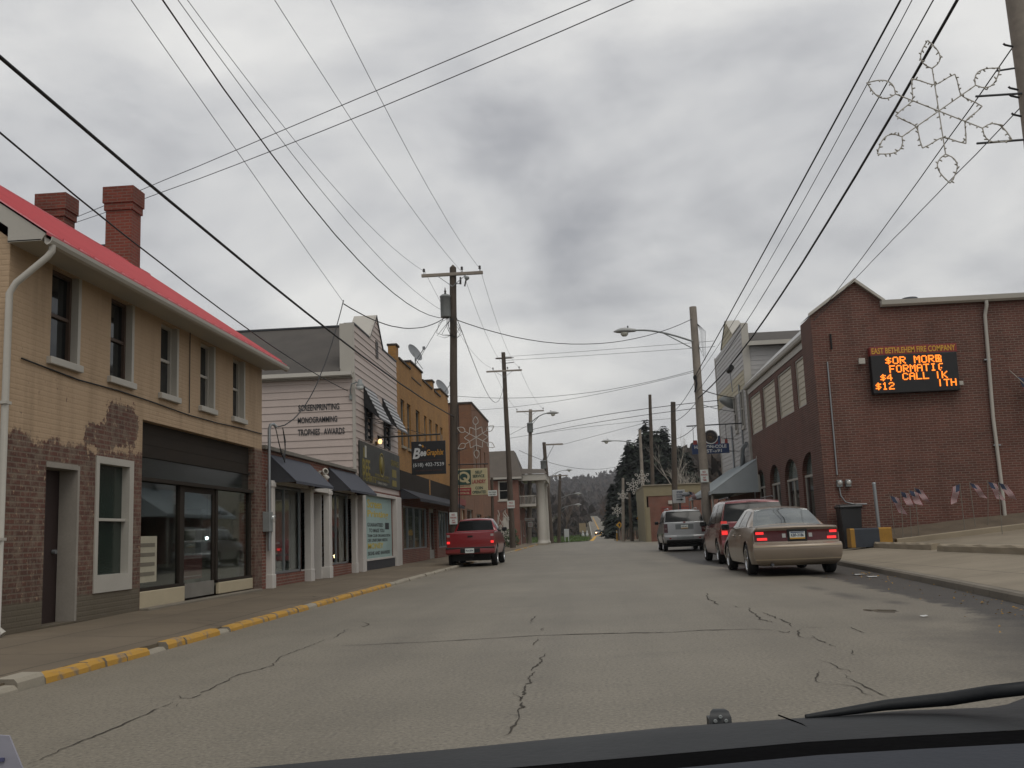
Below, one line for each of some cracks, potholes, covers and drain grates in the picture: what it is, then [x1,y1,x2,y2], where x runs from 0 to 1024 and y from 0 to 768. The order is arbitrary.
crack [30,593,883,763]
